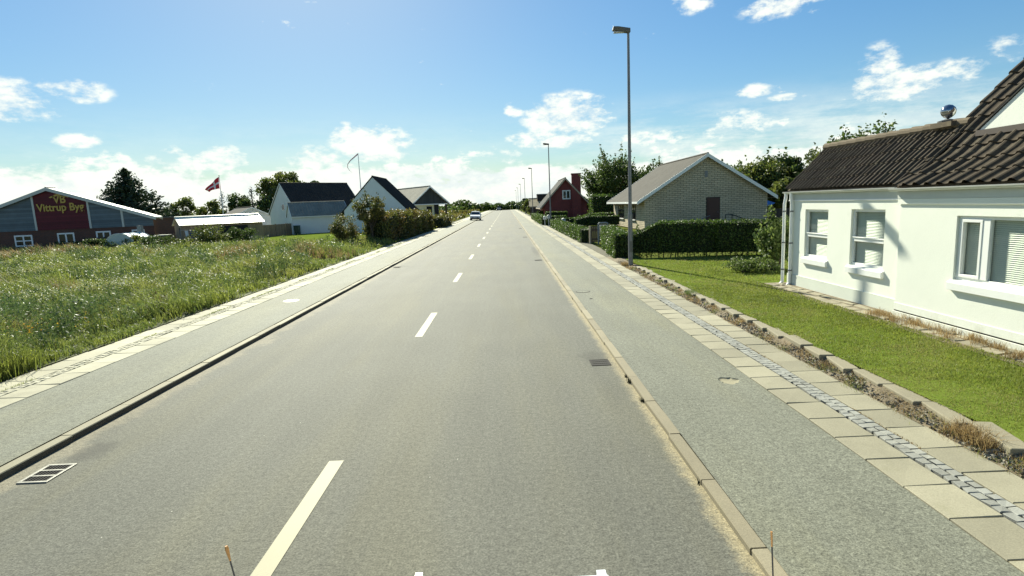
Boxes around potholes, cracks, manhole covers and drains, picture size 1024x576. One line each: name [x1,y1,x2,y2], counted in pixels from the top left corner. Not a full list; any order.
drain grate [16,463,78,484]
